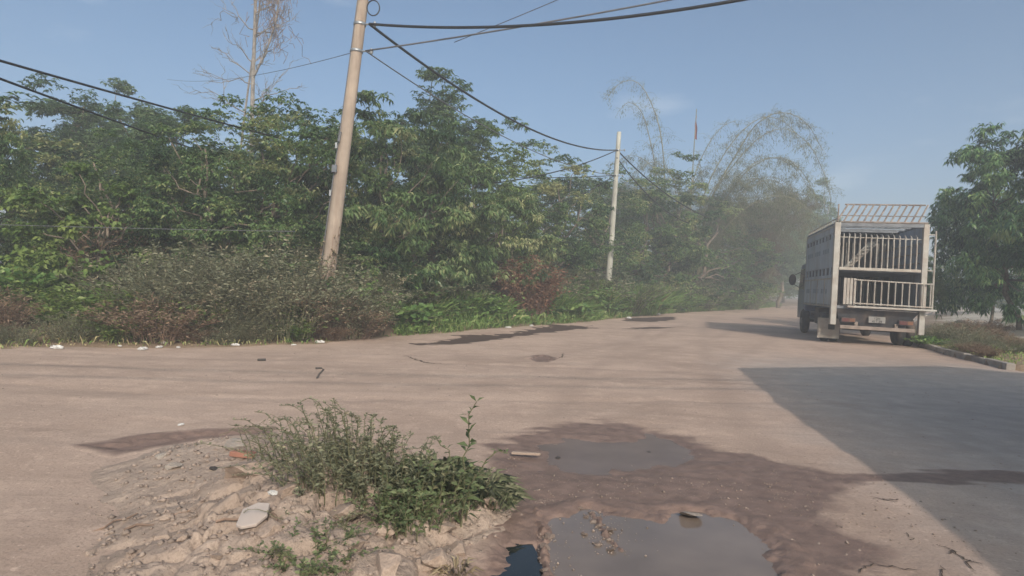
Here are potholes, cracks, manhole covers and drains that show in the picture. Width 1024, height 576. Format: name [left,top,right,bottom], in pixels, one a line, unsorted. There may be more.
pothole [447,497,817,576]
pothole [521,354,561,363]
crack [940,546,979,576]
